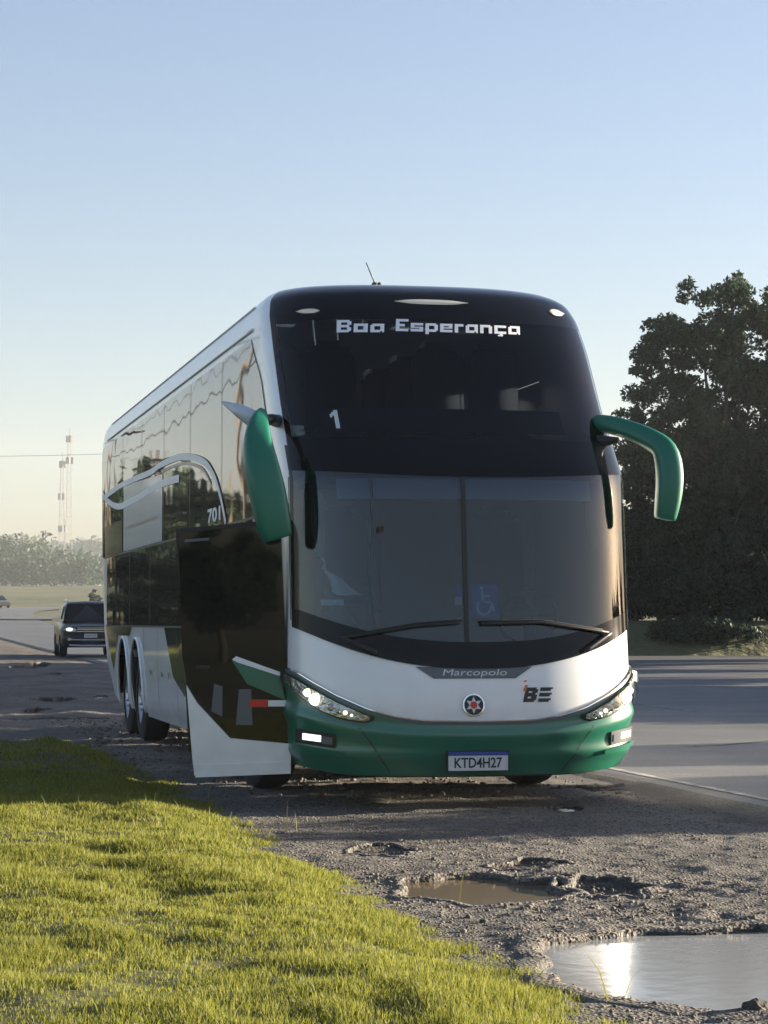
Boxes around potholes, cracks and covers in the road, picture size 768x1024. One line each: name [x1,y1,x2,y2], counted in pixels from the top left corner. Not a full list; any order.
pothole [482,856,580,871]
pothole [506,919,768,1017]
pothole [344,842,422,857]
pothole [388,871,591,908]
pothole [546,872,663,899]
